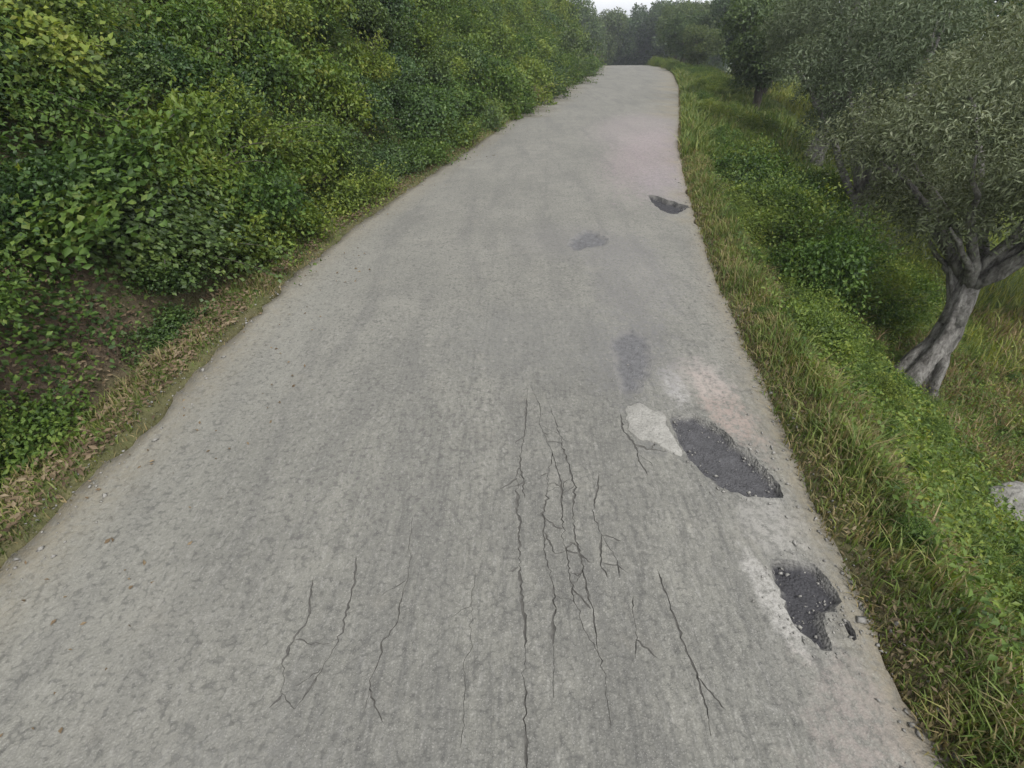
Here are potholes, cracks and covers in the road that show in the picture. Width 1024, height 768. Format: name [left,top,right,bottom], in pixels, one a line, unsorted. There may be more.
pothole [731,538,878,670]
pothole [649,195,690,214]
pothole [652,402,807,518]
crack [363,516,413,722]
crack [269,558,357,709]
crack [500,389,726,768]
